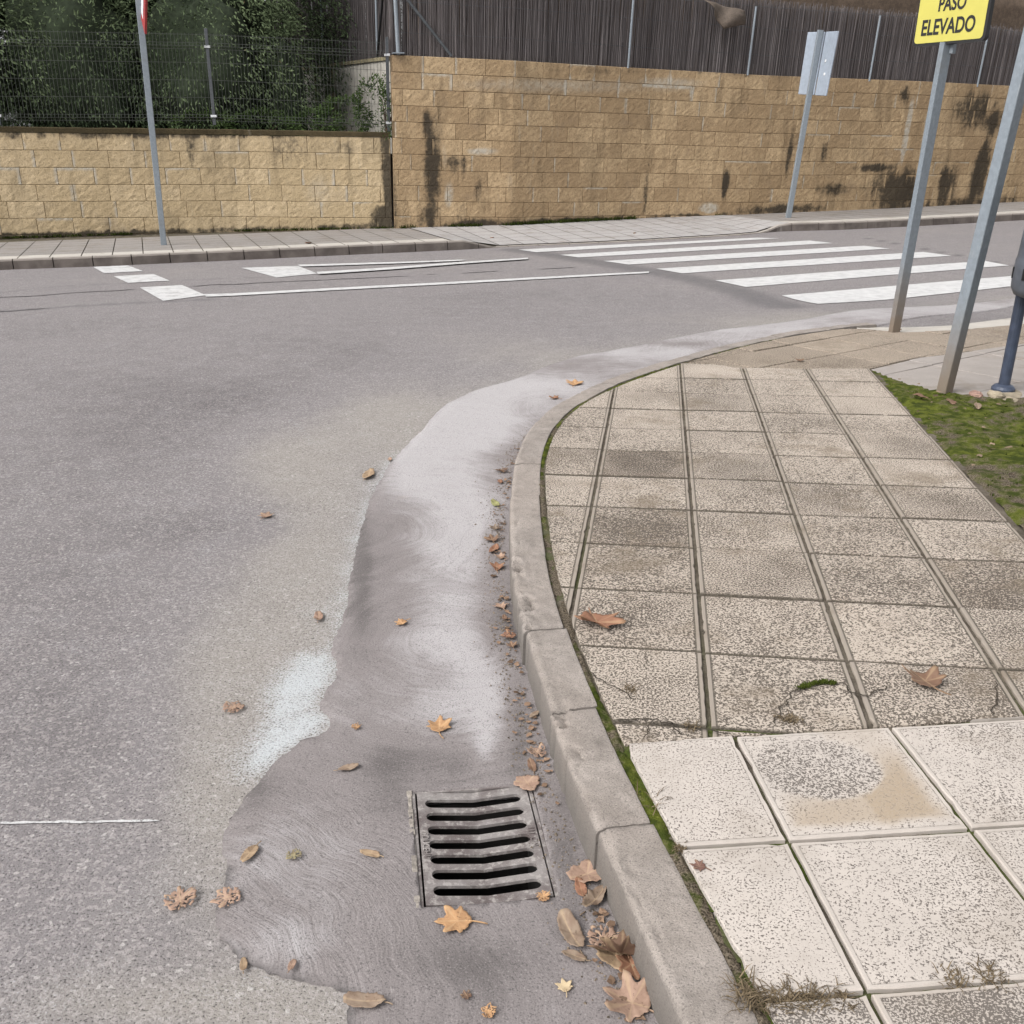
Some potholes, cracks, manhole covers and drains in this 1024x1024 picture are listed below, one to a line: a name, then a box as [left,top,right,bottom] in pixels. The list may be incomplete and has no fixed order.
drain grate [406,786,559,908]
crack [990,682,998,716]
crack [773,681,889,725]
